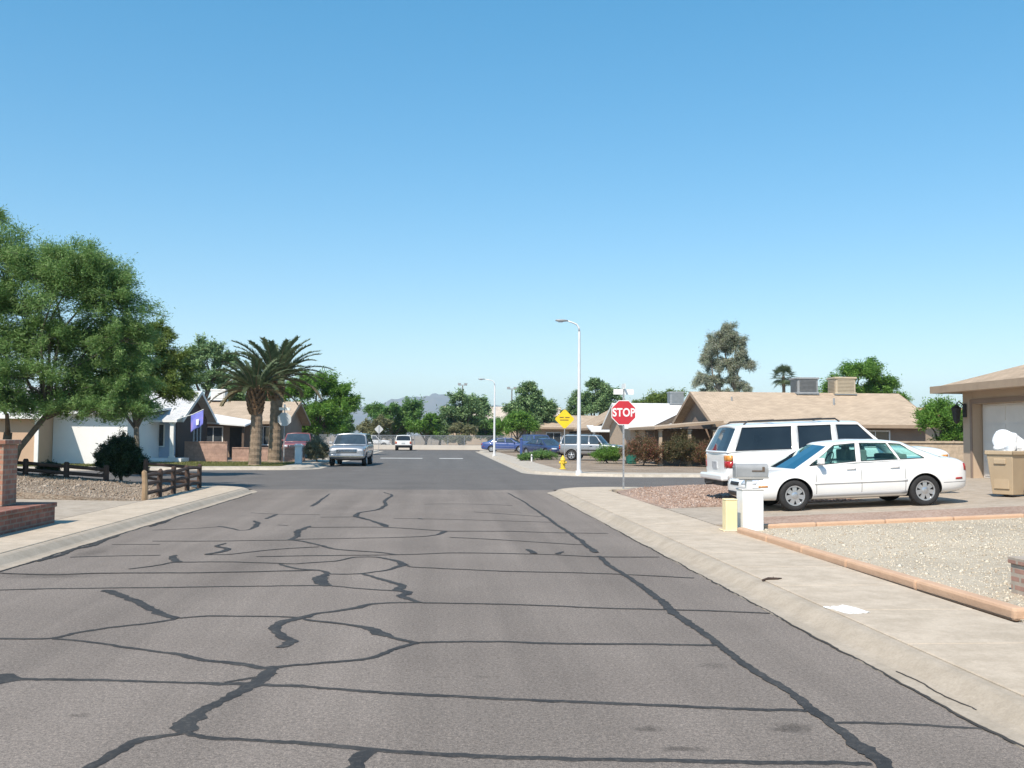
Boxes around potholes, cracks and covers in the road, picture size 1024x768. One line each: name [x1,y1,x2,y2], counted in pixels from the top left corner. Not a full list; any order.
crack [0,492,873,768]
crack [896,671,977,710]
